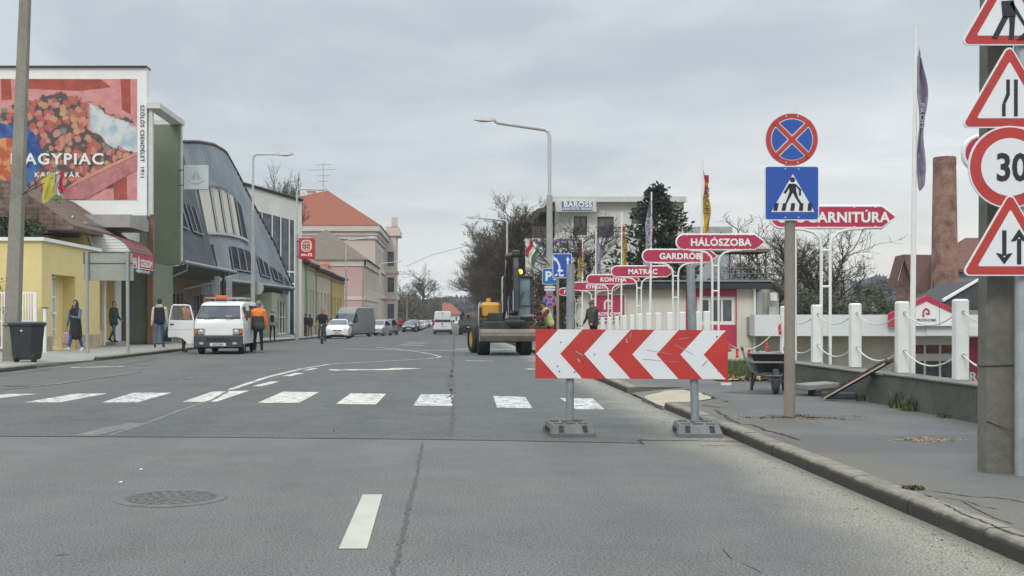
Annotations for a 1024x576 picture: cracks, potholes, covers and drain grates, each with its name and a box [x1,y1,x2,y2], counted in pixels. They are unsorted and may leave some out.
manhole cover [114,489,228,507]
crack [928,490,1022,524]
